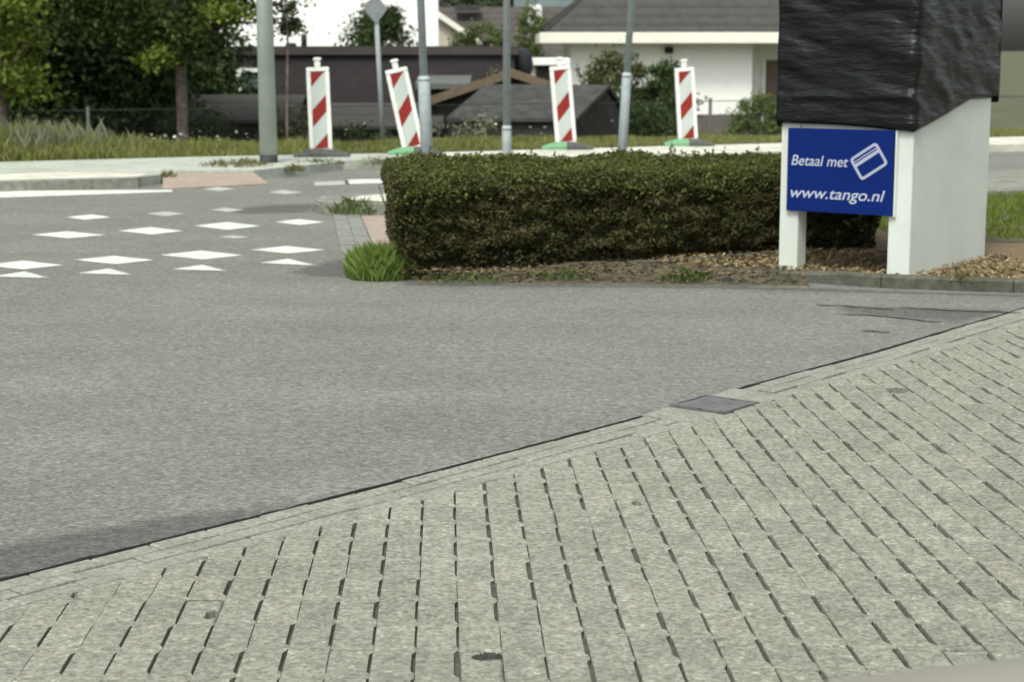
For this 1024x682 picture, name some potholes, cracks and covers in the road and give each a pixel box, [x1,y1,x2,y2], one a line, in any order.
manhole cover [641,388,786,423]
